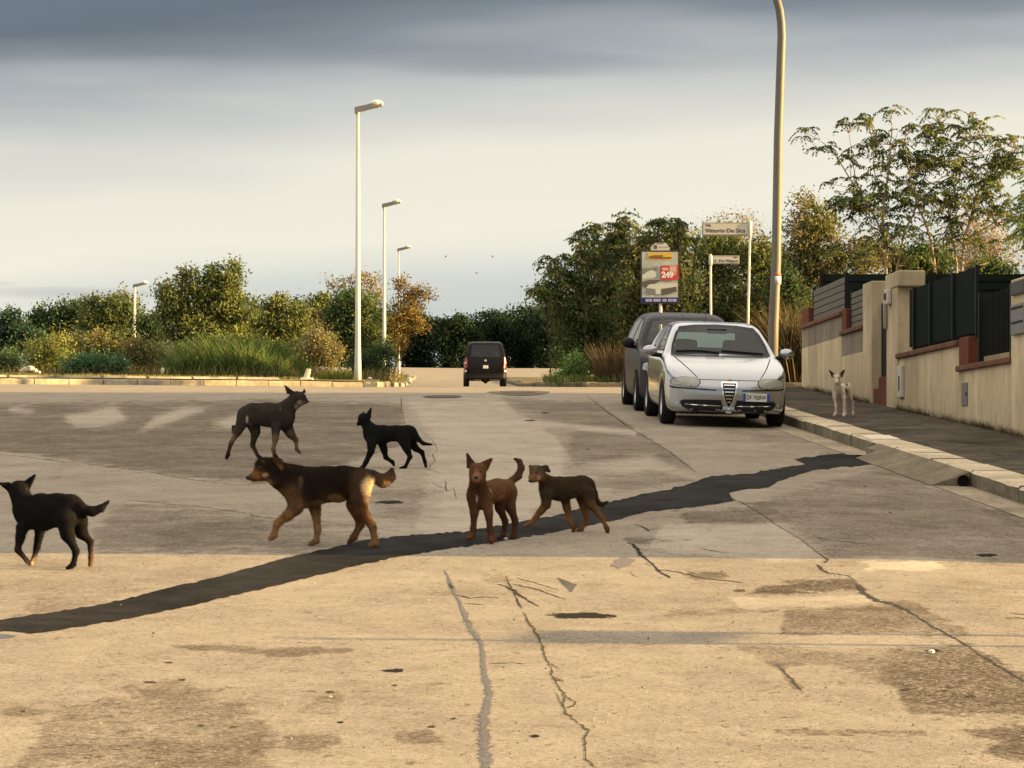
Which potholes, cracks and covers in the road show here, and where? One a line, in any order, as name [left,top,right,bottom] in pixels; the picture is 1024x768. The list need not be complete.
crack [627,524,741,583]
crack [444,570,596,768]
